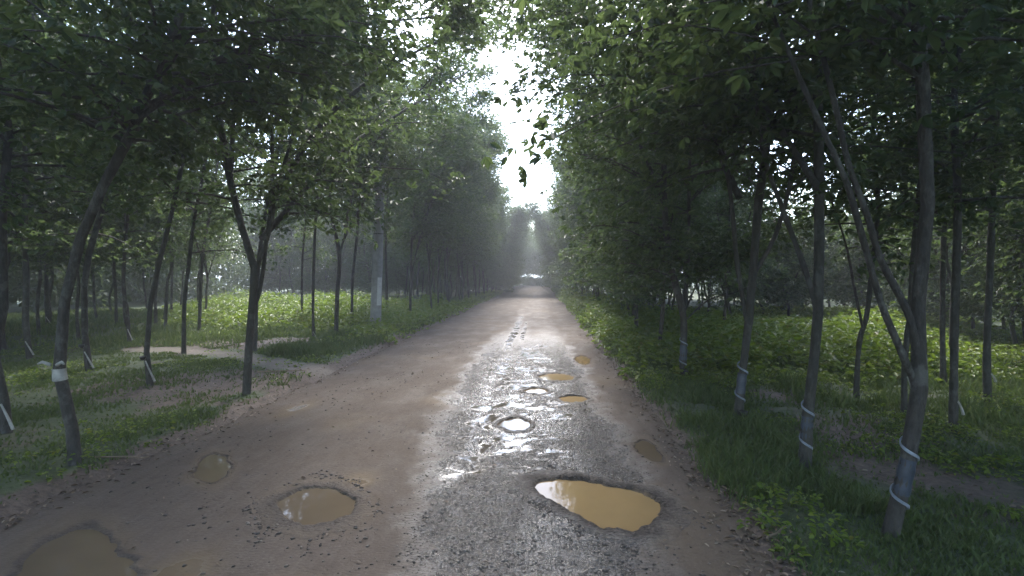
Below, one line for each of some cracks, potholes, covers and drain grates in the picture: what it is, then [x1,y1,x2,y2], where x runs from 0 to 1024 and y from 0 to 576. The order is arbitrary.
pothole [187,451,235,486]
pothole [519,387,553,395]
pothole [1,518,154,576]
pothole [492,415,536,433]
pothole [554,394,594,405]
pothole [573,355,593,366]
pothole [631,438,666,464]
pothole [533,372,580,382]
pothole [254,478,377,540]
pothole [511,469,695,550]
